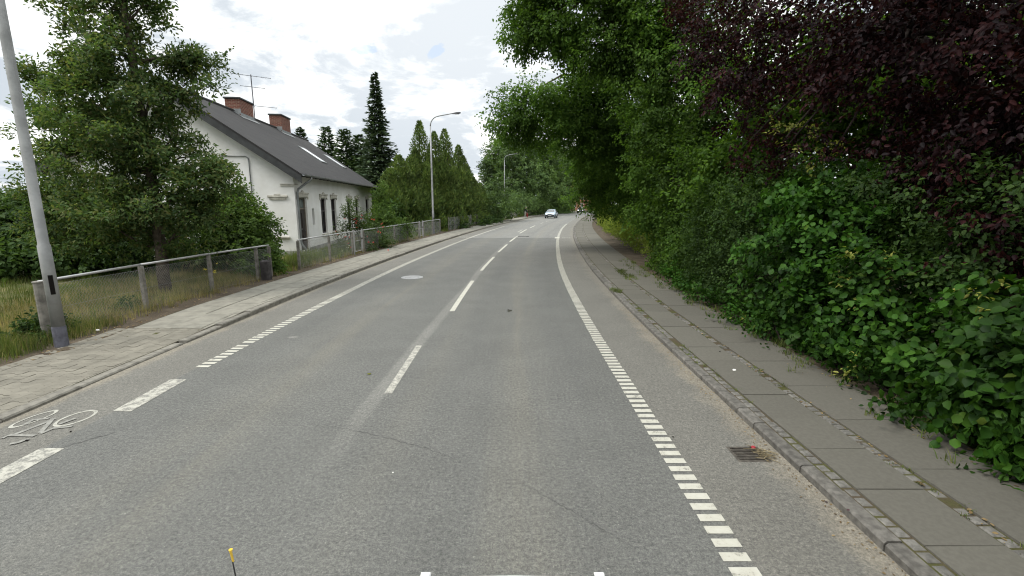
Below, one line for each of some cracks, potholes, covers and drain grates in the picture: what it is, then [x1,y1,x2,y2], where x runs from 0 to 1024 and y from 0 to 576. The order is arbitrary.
drain grate [726,447,772,462]
